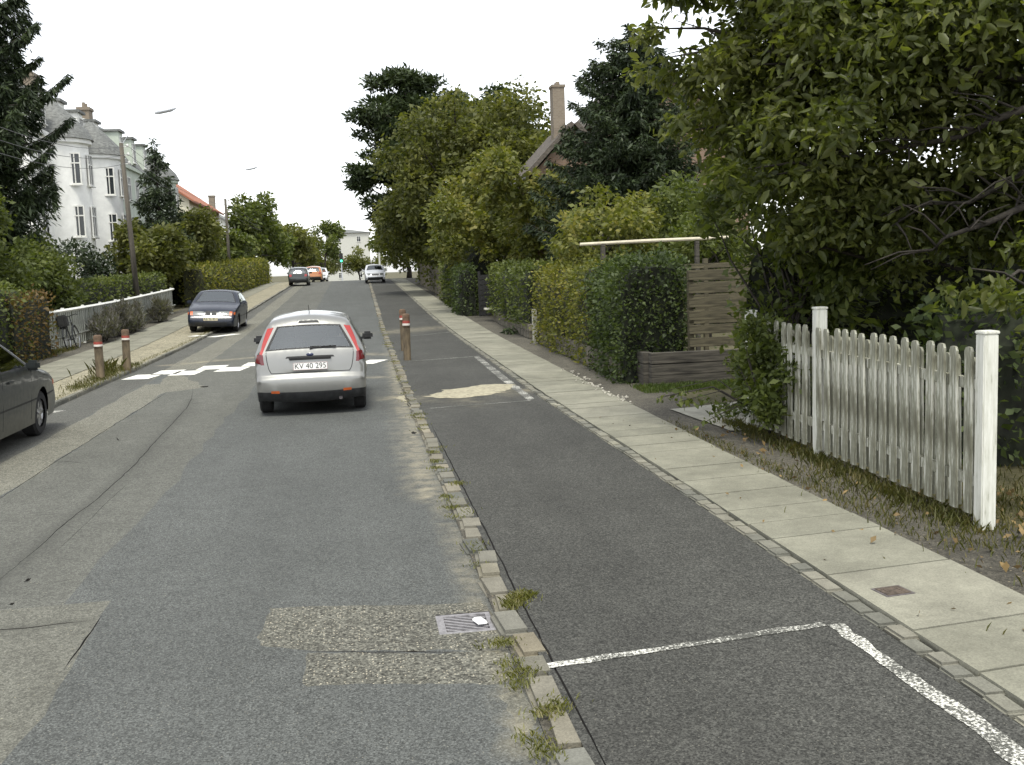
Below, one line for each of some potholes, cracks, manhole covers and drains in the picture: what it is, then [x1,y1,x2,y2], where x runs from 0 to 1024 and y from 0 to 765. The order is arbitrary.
crack [0,618,100,668]
manhole cover [871,585,915,597]
drain grate [435,611,496,650]
